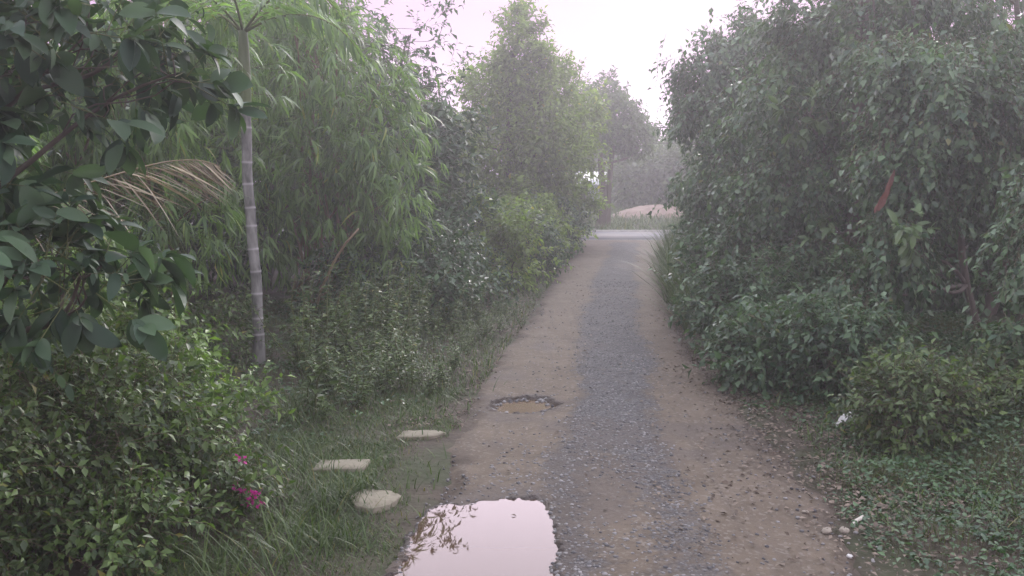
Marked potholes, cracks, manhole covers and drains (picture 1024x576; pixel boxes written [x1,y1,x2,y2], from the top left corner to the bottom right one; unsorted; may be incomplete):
pothole [485,394,566,414]
pothole [383,494,567,576]
